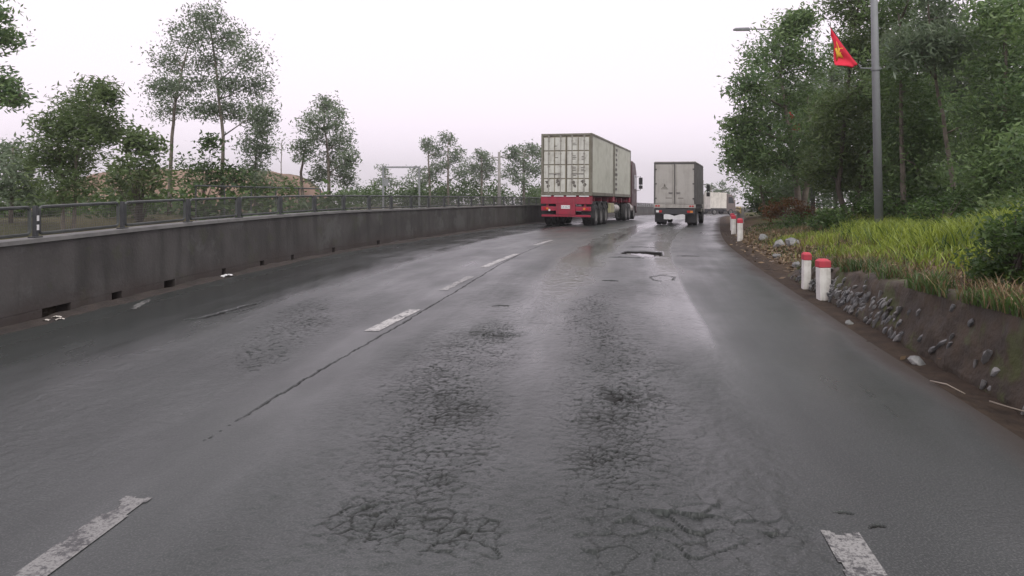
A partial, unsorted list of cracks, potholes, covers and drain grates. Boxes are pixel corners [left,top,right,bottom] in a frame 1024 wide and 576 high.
crack [184,275,888,576]
